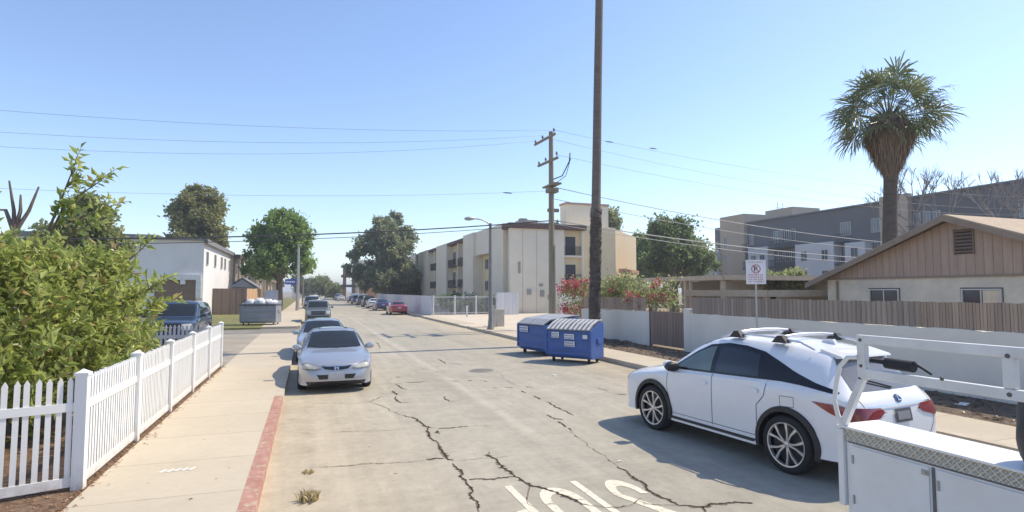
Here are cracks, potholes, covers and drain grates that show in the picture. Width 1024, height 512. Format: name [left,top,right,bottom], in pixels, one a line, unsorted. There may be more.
crack [370,359,752,511]
